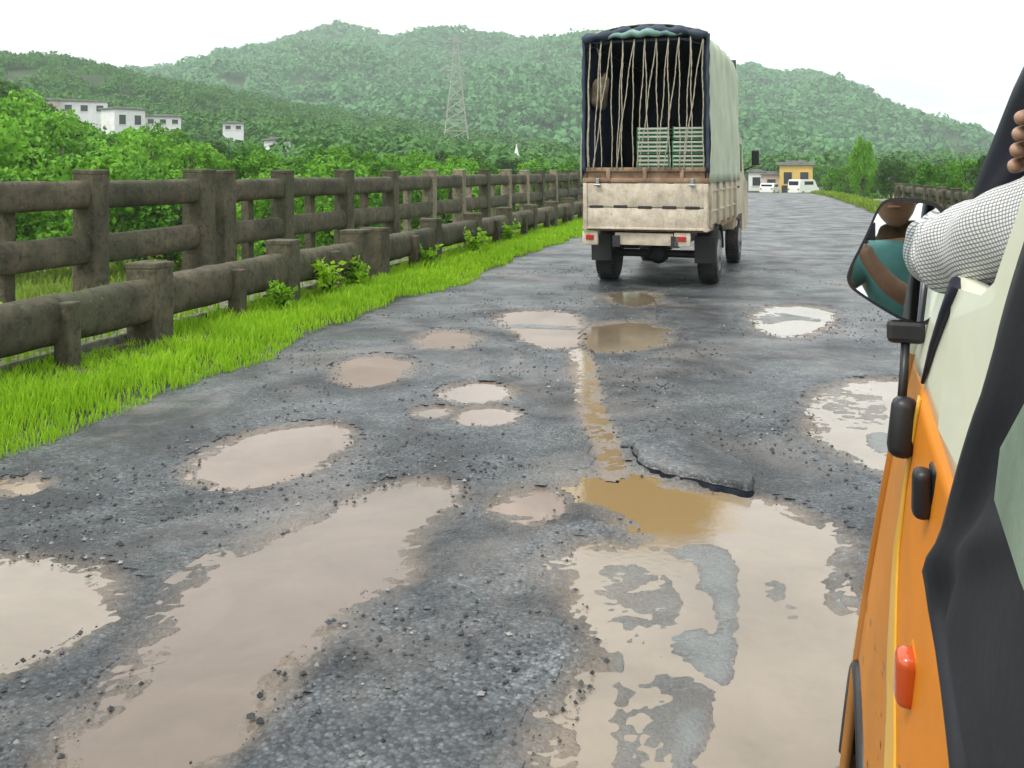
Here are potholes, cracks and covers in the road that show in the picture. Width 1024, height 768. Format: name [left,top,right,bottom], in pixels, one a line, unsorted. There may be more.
pothole [0,470,490,768]
pothole [579,317,694,357]
pothole [164,417,371,496]
pothole [394,326,501,352]
pothole [593,288,677,309]
pothole [500,463,873,768]
pothole [469,482,581,531]
pothole [561,348,639,482]
pothole [401,401,462,422]
crack [630,446,755,498]
pothole [733,302,856,340]
pothole [477,307,604,352]
